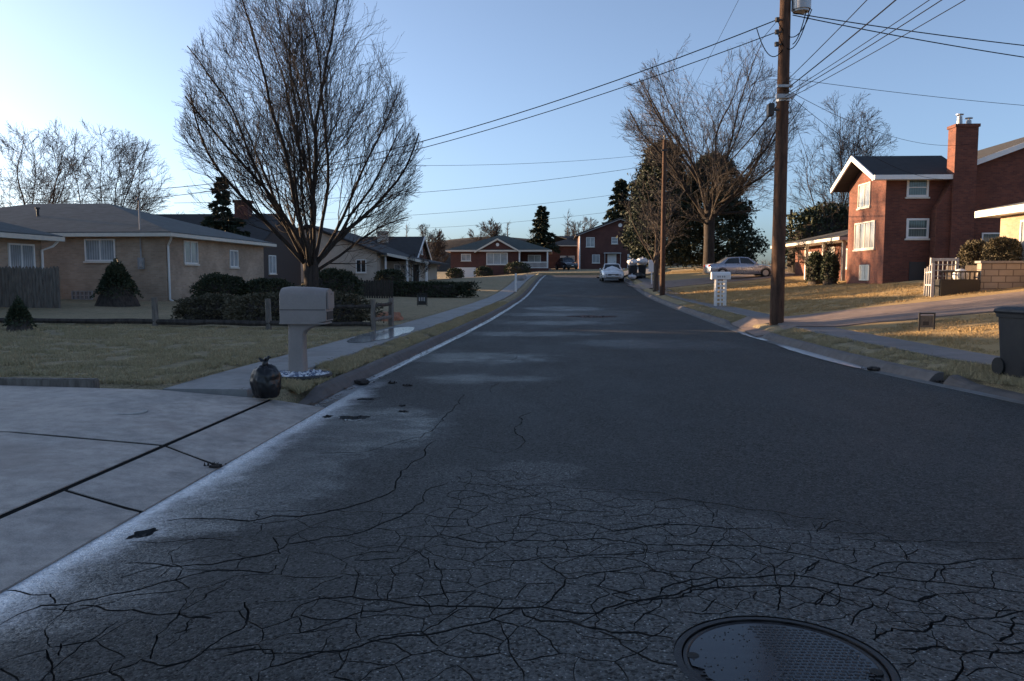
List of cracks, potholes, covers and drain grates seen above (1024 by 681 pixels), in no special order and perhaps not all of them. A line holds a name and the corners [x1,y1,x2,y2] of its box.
crack [0,395,1024,681]
pothole [126,528,158,542]
manhole cover [673,616,901,681]
